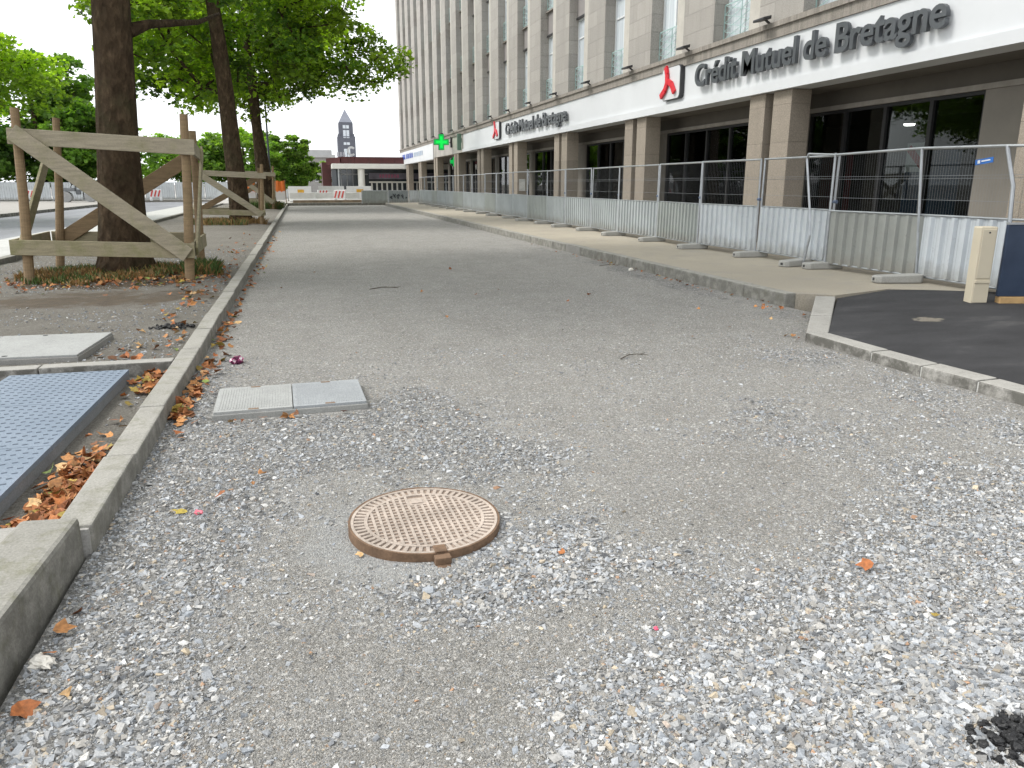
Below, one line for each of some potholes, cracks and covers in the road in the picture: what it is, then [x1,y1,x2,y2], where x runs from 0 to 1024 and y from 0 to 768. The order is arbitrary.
manhole cover [348,487,500,569]
utility cover [212,379,368,421]
utility cover [0,332,114,365]
utility cover [0,369,130,517]
